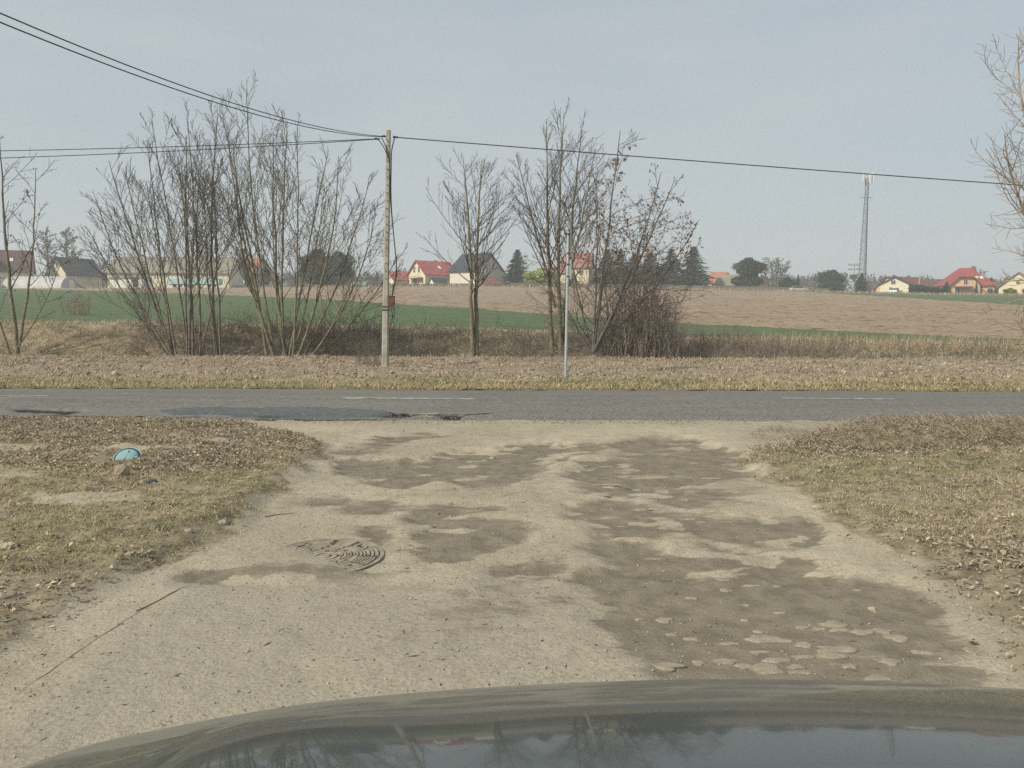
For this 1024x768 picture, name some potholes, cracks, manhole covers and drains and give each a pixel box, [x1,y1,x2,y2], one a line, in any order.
crack [251,413,490,421]
crack [20,586,187,692]
manhole cover [283,538,384,572]
